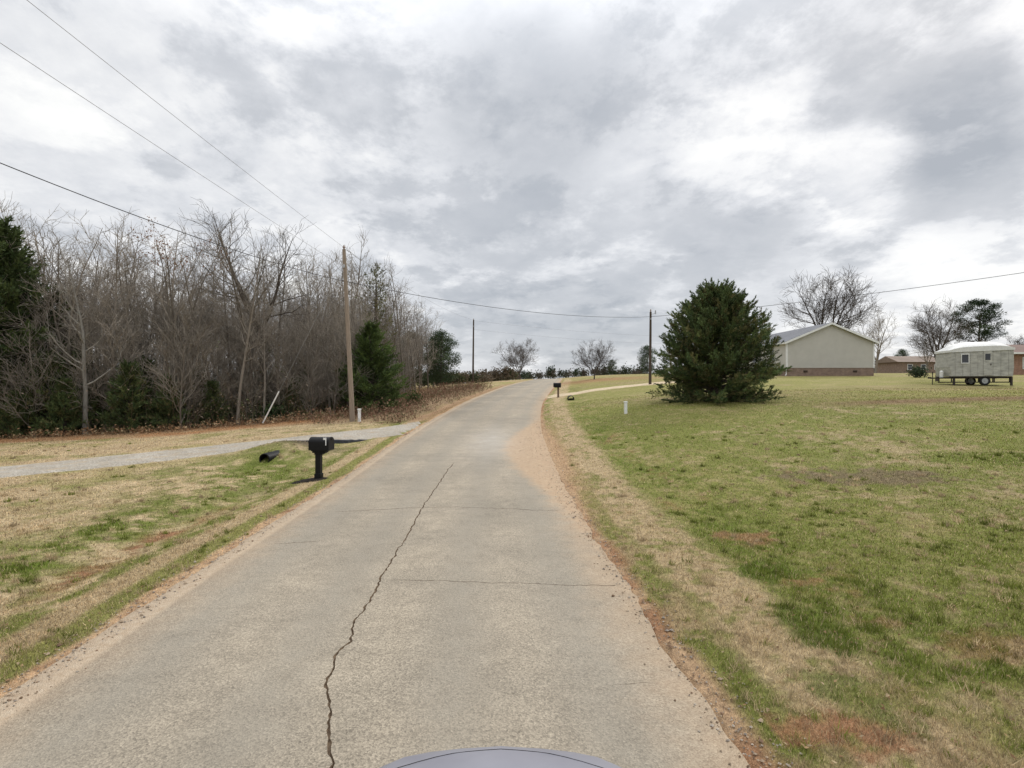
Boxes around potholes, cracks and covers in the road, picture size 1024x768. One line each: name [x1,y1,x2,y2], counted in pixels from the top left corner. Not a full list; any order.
crack [267,463,615,768]
